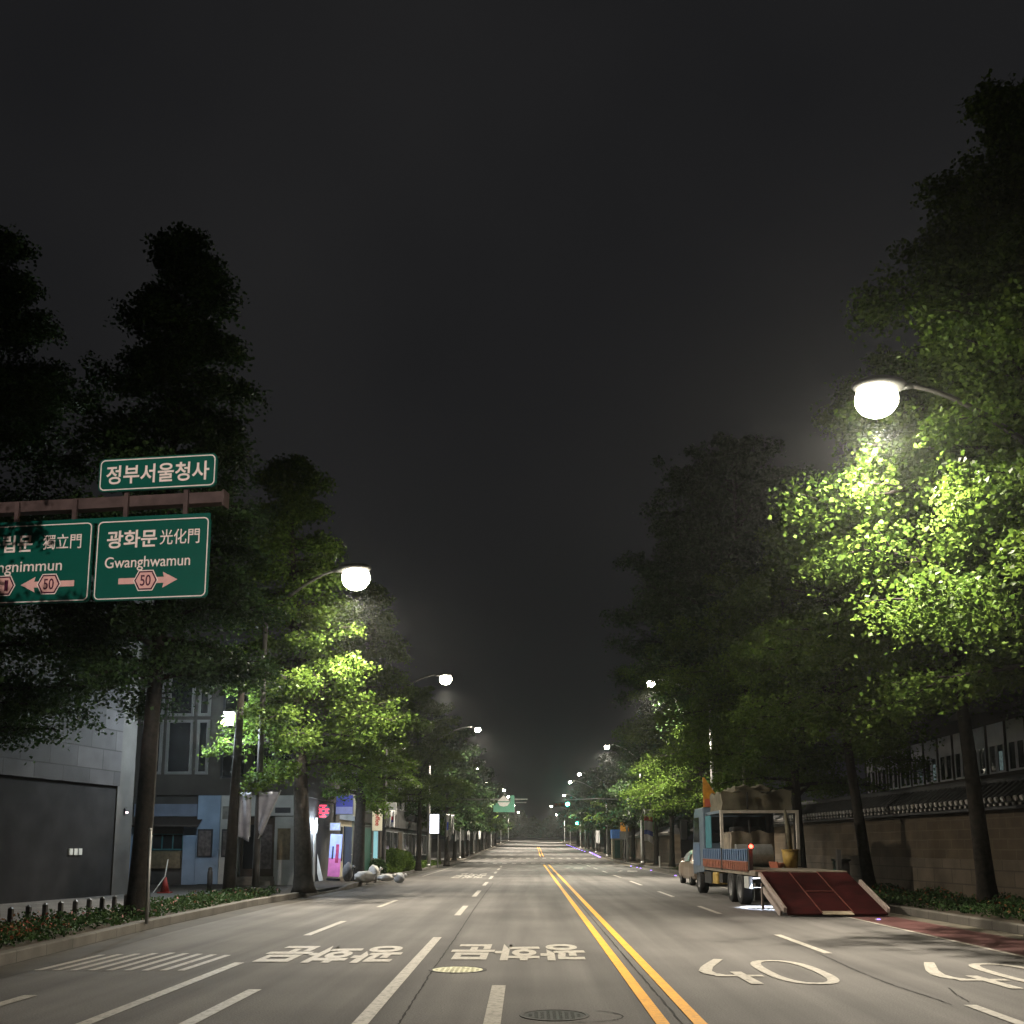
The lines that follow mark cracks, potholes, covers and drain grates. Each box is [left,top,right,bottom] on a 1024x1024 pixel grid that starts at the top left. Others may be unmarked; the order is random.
crack [816,952,969,1005]
manhole cover [519,1009,590,1021]
